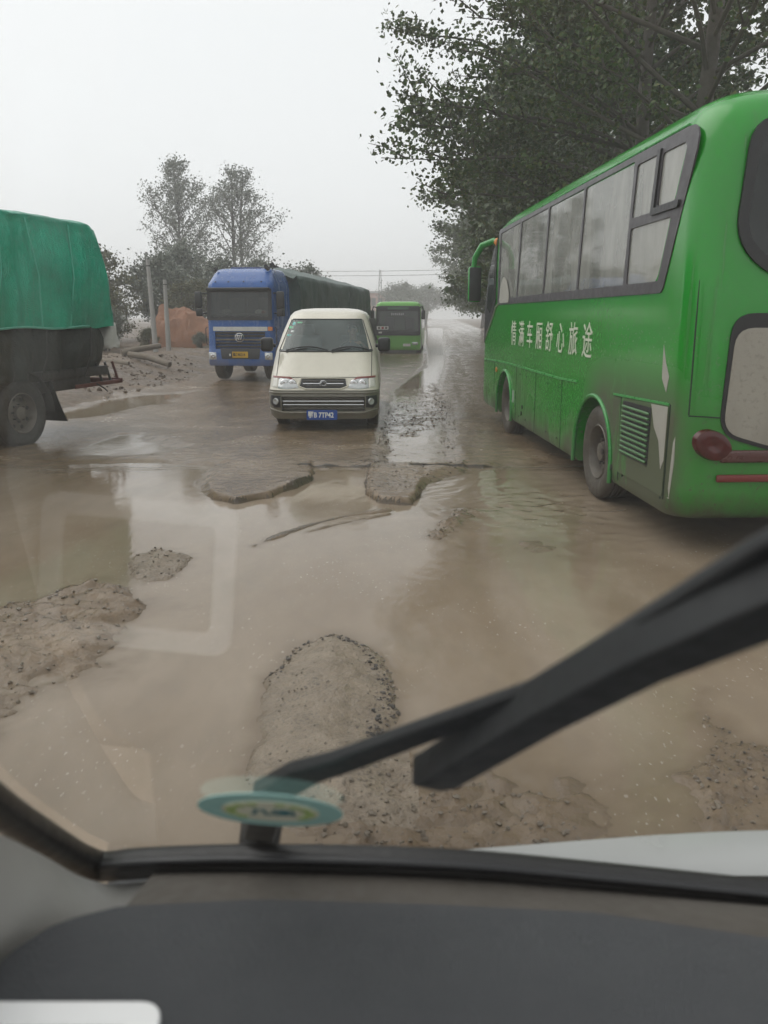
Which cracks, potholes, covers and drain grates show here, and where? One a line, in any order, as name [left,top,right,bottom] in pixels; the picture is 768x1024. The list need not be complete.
pothole [211,469,360,542]
pothole [364,474,441,506]
